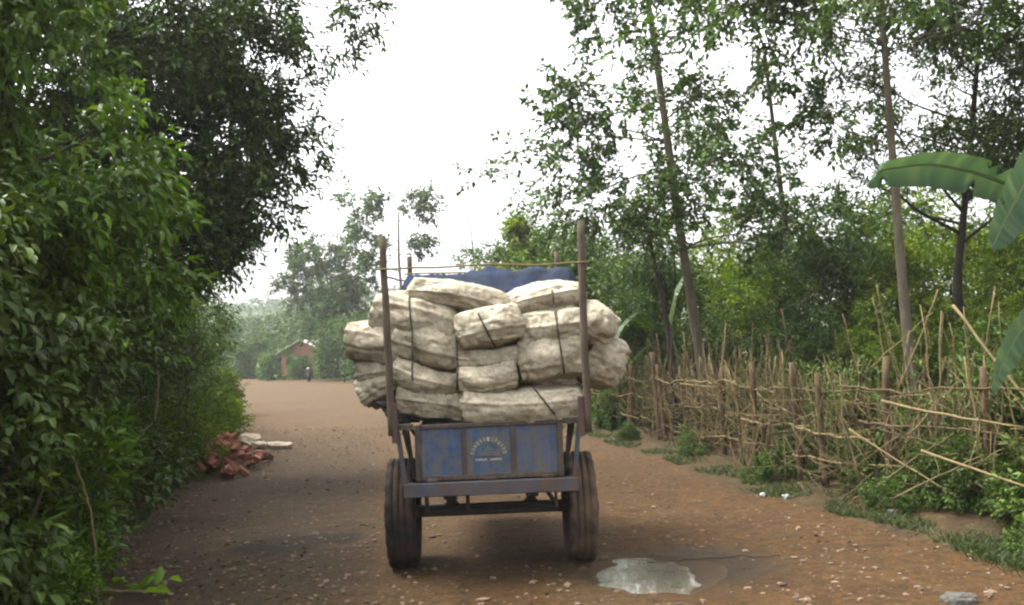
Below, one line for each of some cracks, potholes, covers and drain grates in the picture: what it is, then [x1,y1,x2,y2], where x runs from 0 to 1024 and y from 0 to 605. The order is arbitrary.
pothole [577,551,728,594]
